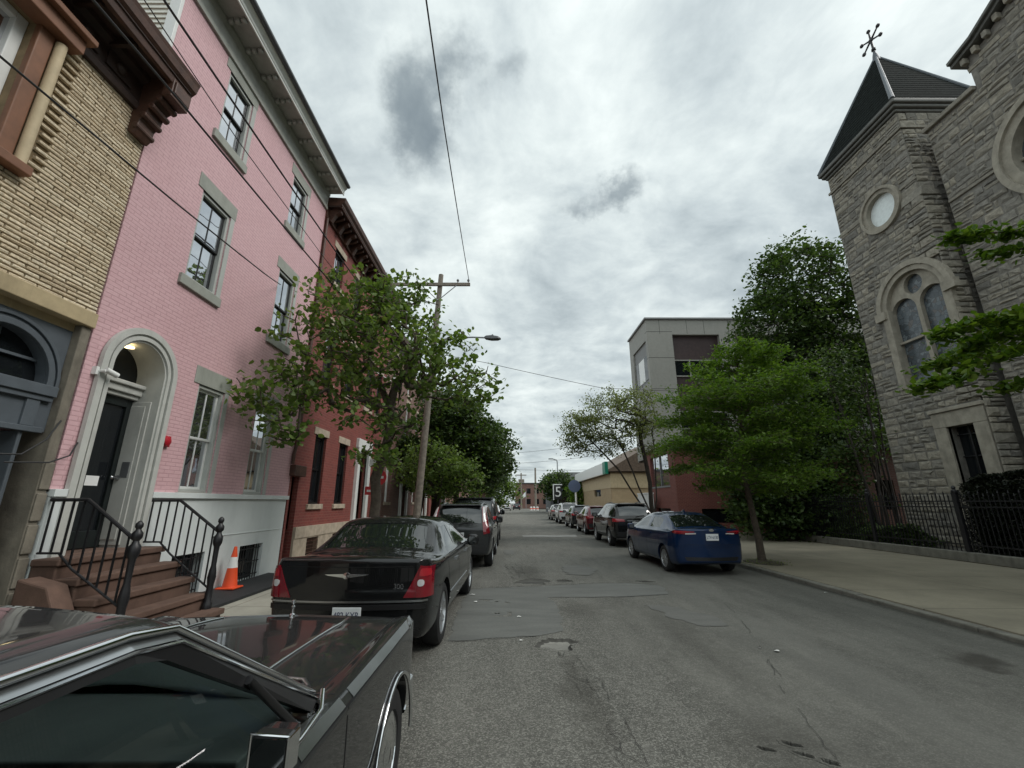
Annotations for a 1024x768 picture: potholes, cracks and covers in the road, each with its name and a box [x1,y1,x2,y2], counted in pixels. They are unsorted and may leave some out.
crack [724,603,841,764]
pothole [525,635,587,654]
